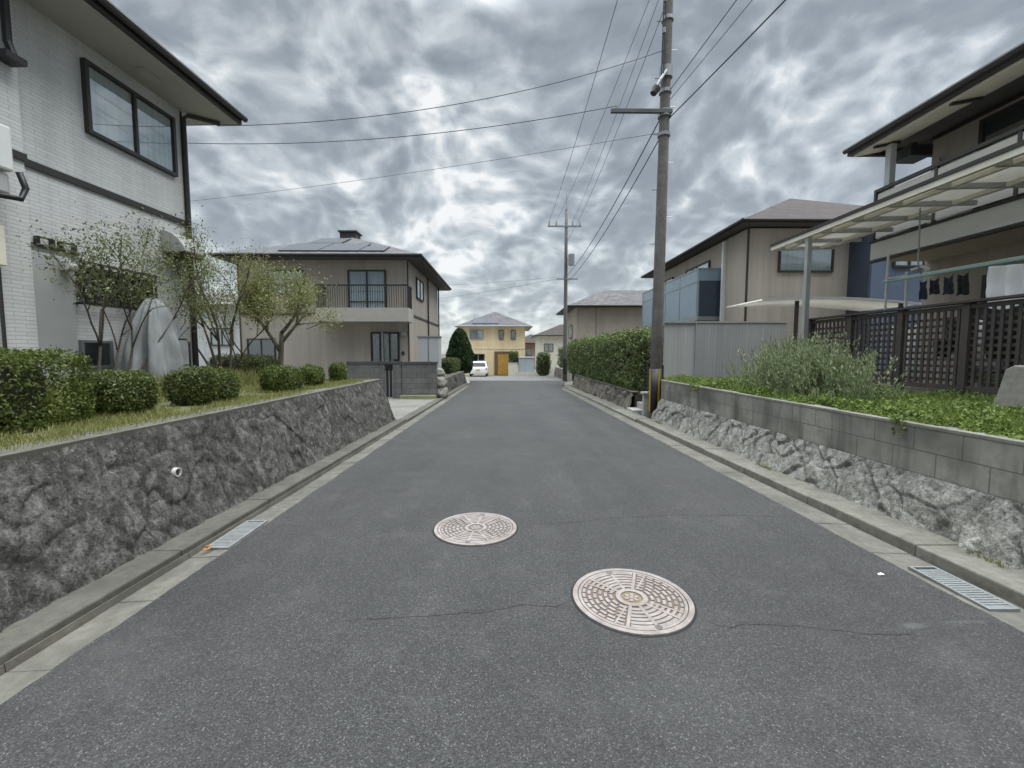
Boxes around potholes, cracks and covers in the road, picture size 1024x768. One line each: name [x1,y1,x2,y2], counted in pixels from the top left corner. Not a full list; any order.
manhole cover [432,512,518,547]
manhole cover [571,568,697,638]
crack [350,604,563,621]
crack [708,620,901,639]
